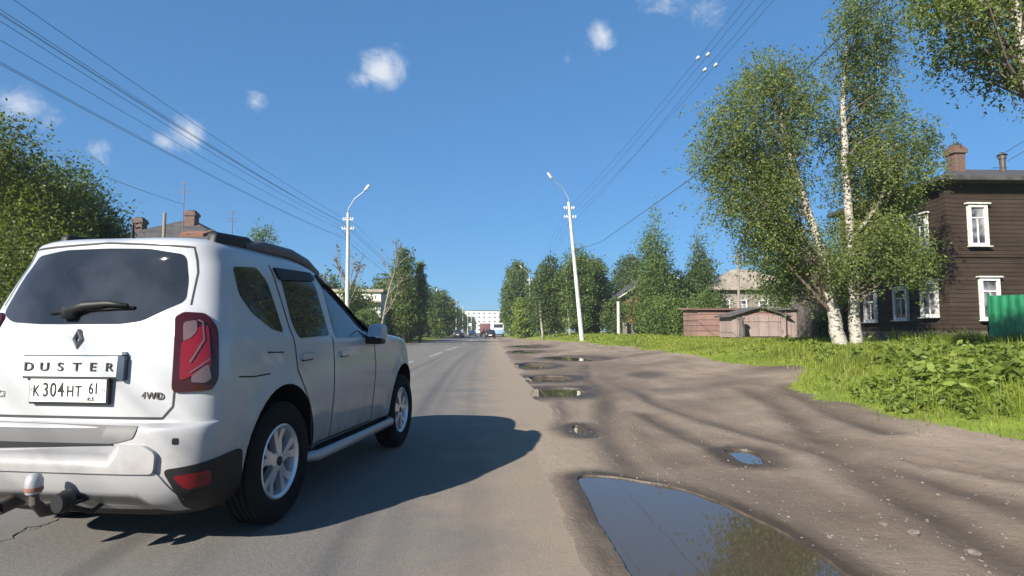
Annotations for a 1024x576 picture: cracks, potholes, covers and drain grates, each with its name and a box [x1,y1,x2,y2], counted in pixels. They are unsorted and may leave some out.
pothole [572,425,587,436]
pothole [577,475,850,576]
pothole [724,448,764,464]
crack [0,515,74,542]
pothole [532,387,589,397]
